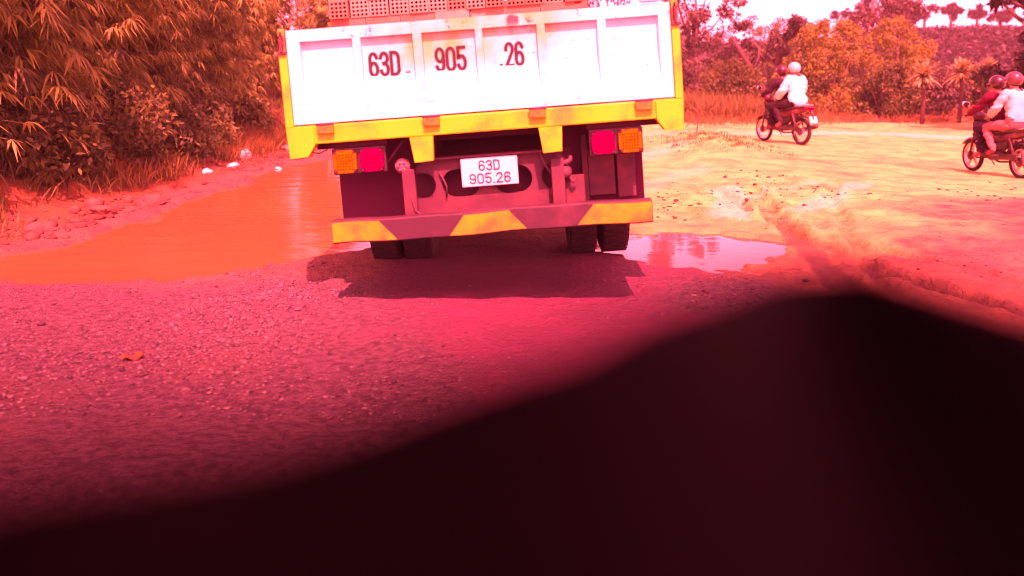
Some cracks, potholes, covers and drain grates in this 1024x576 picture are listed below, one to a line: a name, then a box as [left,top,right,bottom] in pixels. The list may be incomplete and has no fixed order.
pothole [0,156,446,288]
pothole [562,225,812,274]
